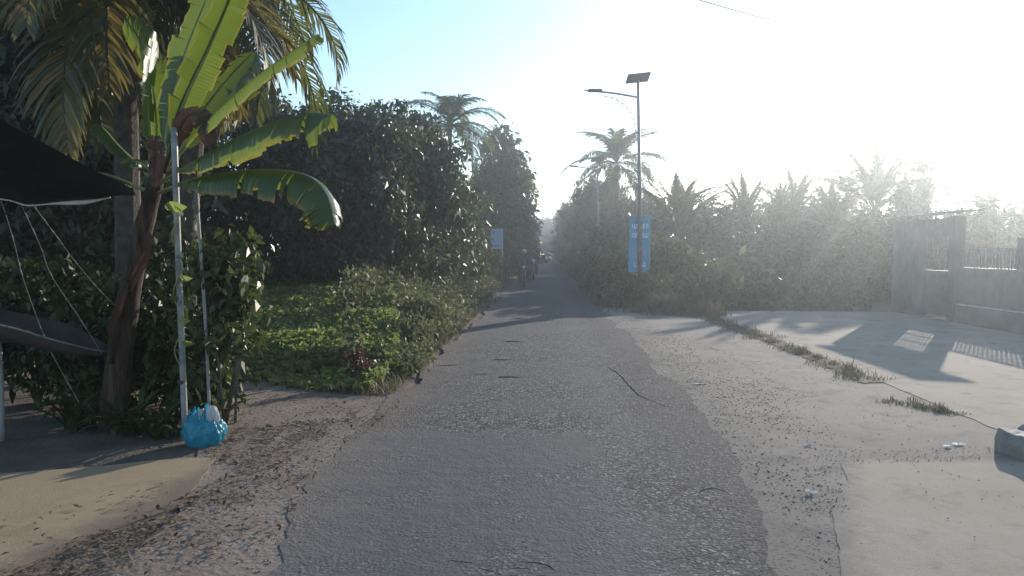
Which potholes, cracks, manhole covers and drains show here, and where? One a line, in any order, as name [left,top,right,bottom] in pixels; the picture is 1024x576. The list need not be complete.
crack [450,560,554,576]
crack [608,367,665,407]
